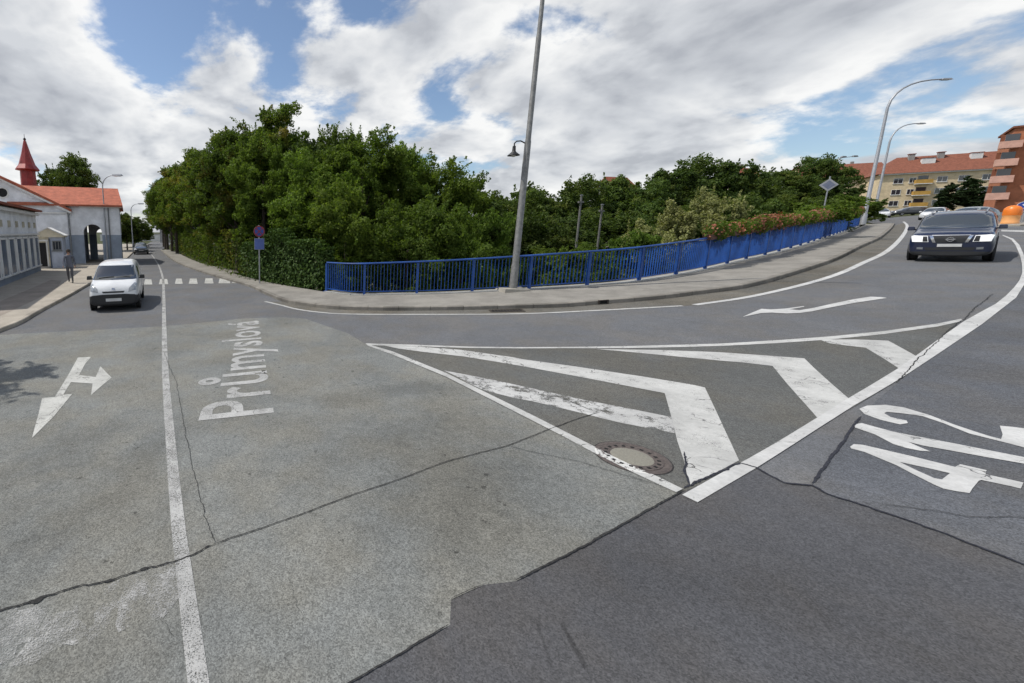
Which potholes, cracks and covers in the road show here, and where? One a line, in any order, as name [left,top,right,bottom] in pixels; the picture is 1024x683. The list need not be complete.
crack [0,350,662,611]
crack [896,294,993,383]
manhole cover [595,441,674,475]
